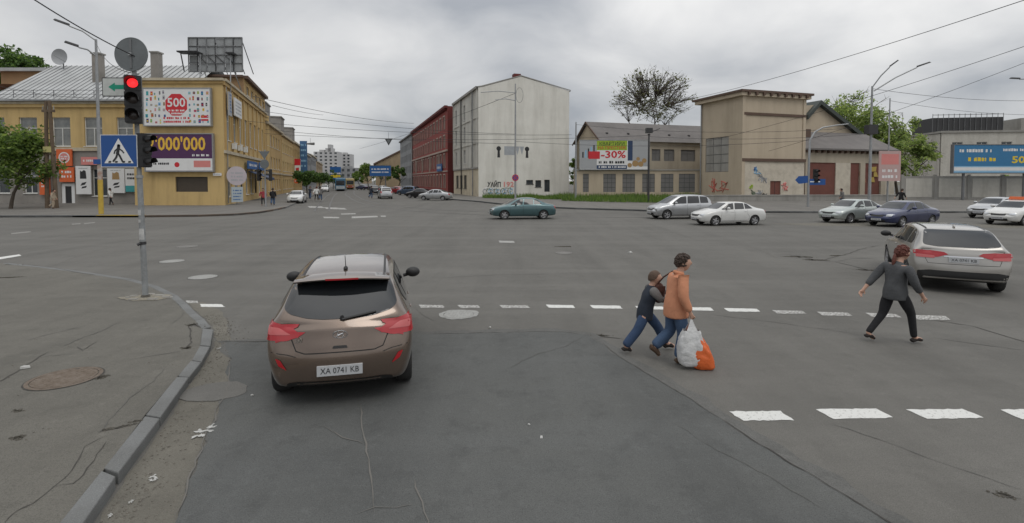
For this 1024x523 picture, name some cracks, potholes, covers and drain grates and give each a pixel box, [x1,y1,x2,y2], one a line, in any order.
crack [794,245,879,271]
manhole cover [439,310,479,319]
crack [316,409,429,523]
crack [5,309,201,522]
manhole cover [21,366,105,391]
